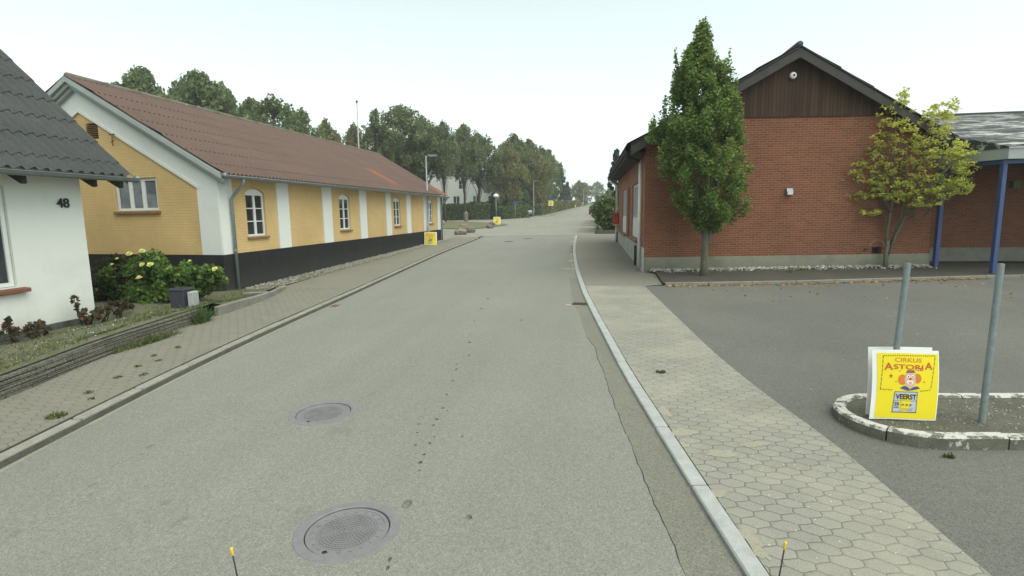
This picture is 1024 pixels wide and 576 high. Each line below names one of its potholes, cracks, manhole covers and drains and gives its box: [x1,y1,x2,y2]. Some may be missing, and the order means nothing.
crack [588,338,686,576]
manhole cover [288,400,358,426]
manhole cover [292,502,400,564]
